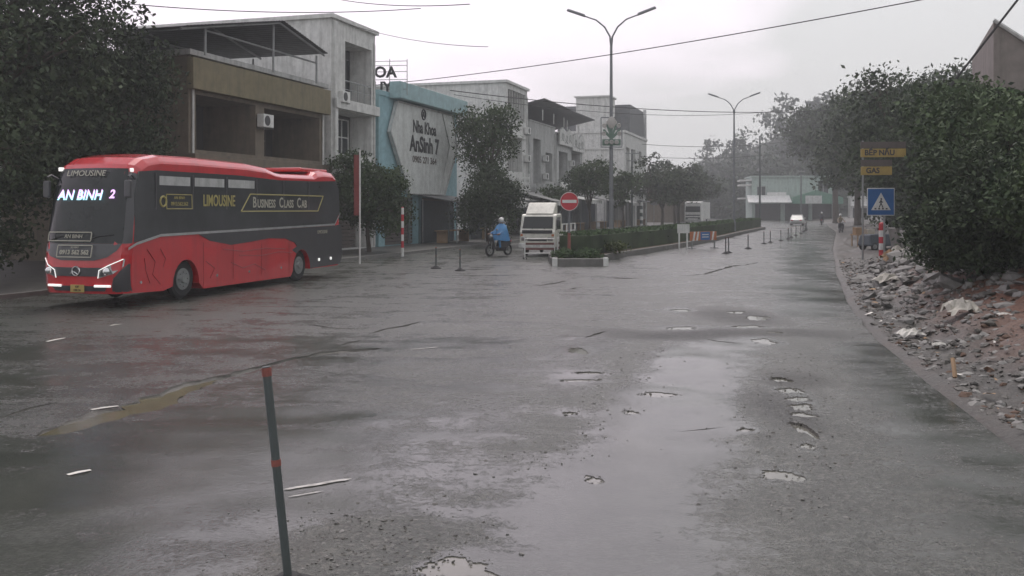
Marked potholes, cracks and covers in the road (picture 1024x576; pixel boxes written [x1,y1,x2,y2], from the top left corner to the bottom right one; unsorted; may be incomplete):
pothole [787,421,820,439]
pothole [761,470,807,482]
crack [305,322,419,346]
pothole [788,403,813,411]
pothole [415,556,500,576]
